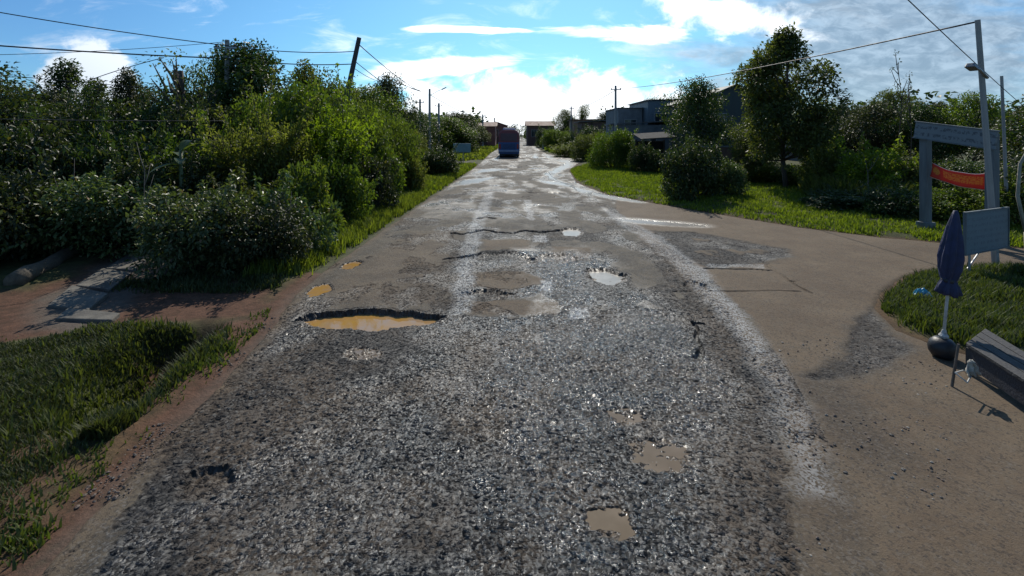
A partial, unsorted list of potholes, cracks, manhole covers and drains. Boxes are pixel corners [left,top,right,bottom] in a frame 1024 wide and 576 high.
crack [442,252,482,260]
pothole [584,267,628,285]
pothole [605,405,649,427]
pothole [625,435,699,474]
pothole [340,260,362,269]
crack [450,216,560,235]
pothole [294,308,447,332]
pothole [584,505,638,543]
pothole [560,227,584,237]
pothole [304,283,333,297]
pothole [167,463,239,504]
crack [690,321,706,359]
